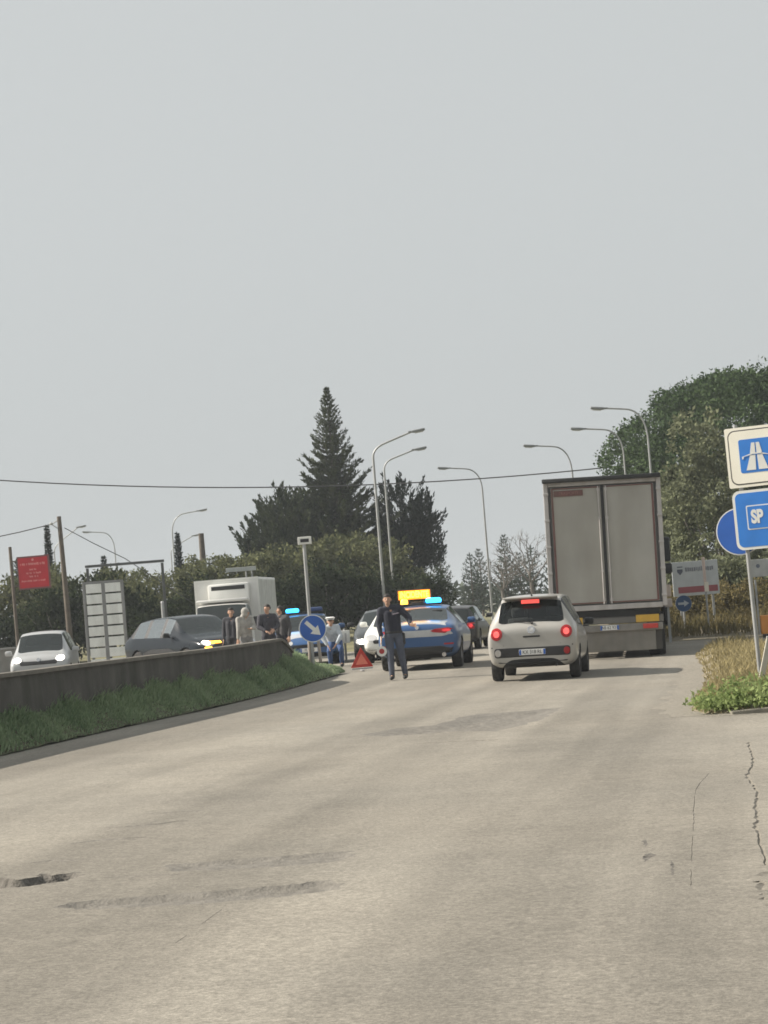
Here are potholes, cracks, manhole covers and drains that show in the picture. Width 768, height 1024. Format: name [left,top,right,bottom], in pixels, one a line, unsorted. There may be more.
pothole [54,880,345,910]
pothole [0,872,82,889]
crack [737,741,768,906]
